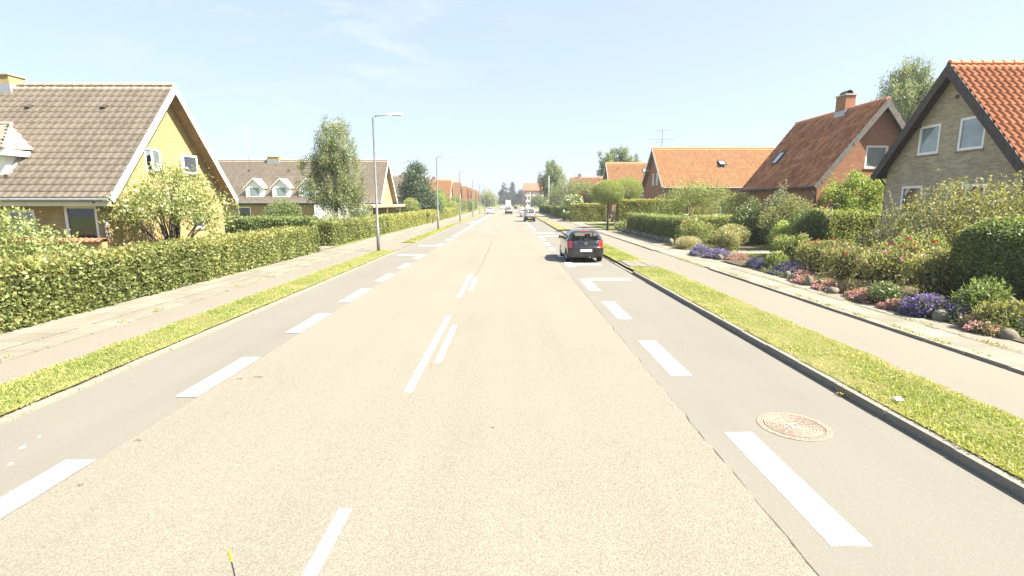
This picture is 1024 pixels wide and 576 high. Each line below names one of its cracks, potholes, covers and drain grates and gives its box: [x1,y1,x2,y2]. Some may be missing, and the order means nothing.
manhole cover [756,412,833,442]
